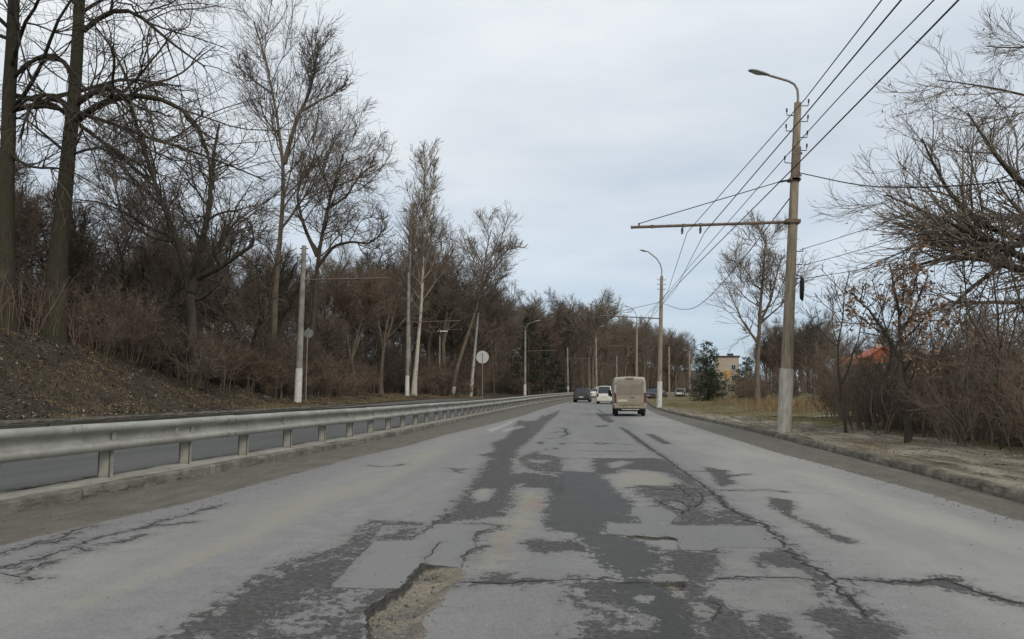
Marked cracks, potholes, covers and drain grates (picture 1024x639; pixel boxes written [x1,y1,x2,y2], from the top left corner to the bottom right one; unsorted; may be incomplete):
crack [414,516,498,560]
crack [526,413,1024,617]
crack [2,505,220,579]
pothole [364,563,467,639]
